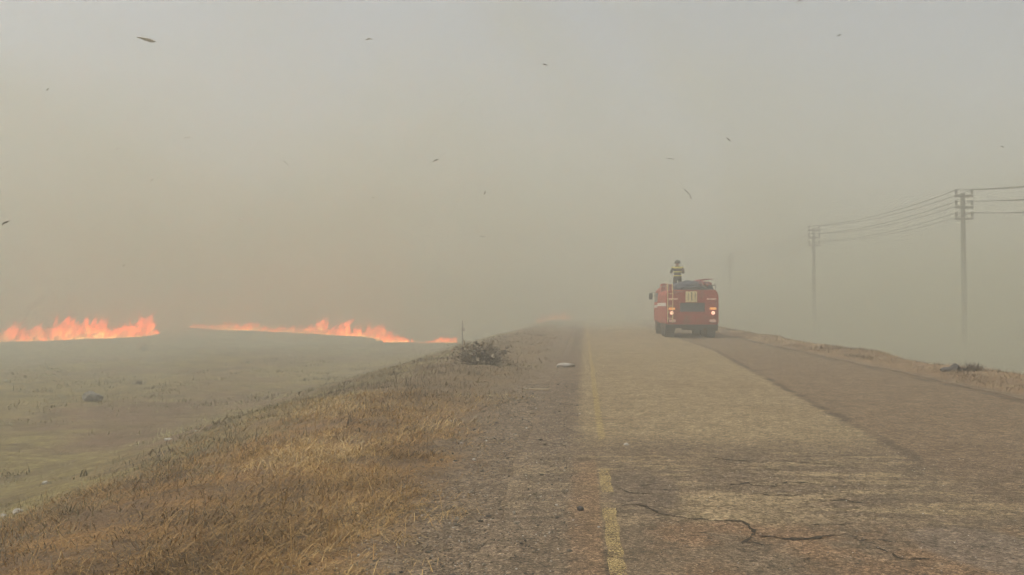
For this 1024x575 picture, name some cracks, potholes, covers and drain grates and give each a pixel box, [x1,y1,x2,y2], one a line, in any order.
crack [618,483,929,559]
